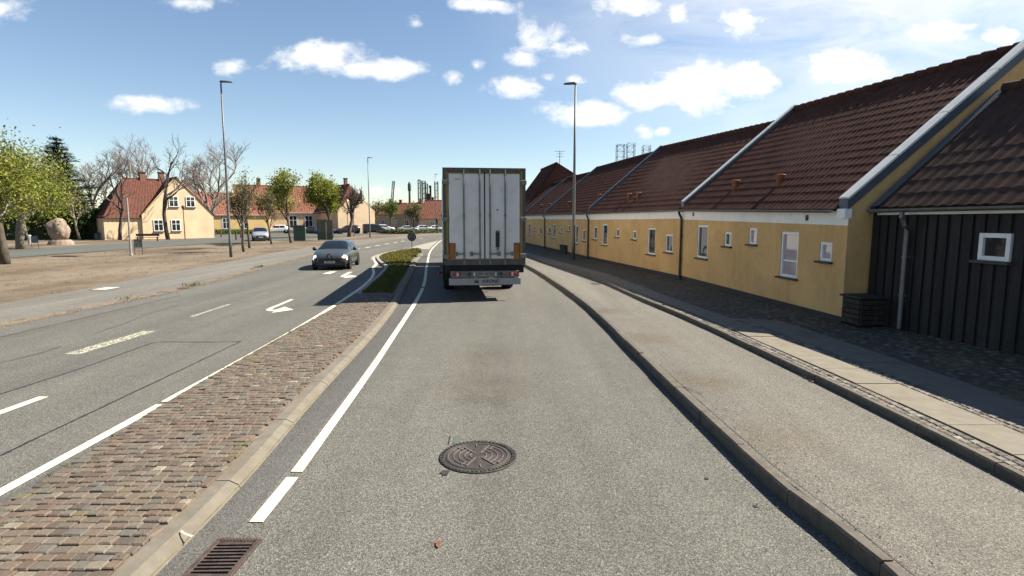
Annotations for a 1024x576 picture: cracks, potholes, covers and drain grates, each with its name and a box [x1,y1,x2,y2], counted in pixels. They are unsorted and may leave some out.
drain grate [181,537,262,576]
manhole cover [439,440,517,474]
